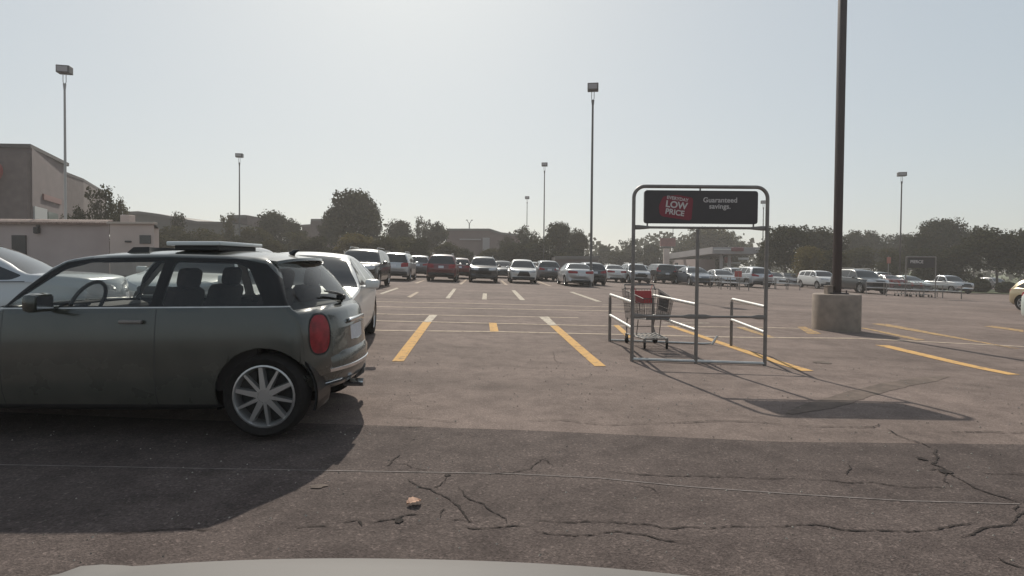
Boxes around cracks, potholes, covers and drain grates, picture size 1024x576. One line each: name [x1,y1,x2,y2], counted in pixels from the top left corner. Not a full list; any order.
crack [611,428,1024,537]
crack [387,454,767,541]
crack [344,513,415,526]
